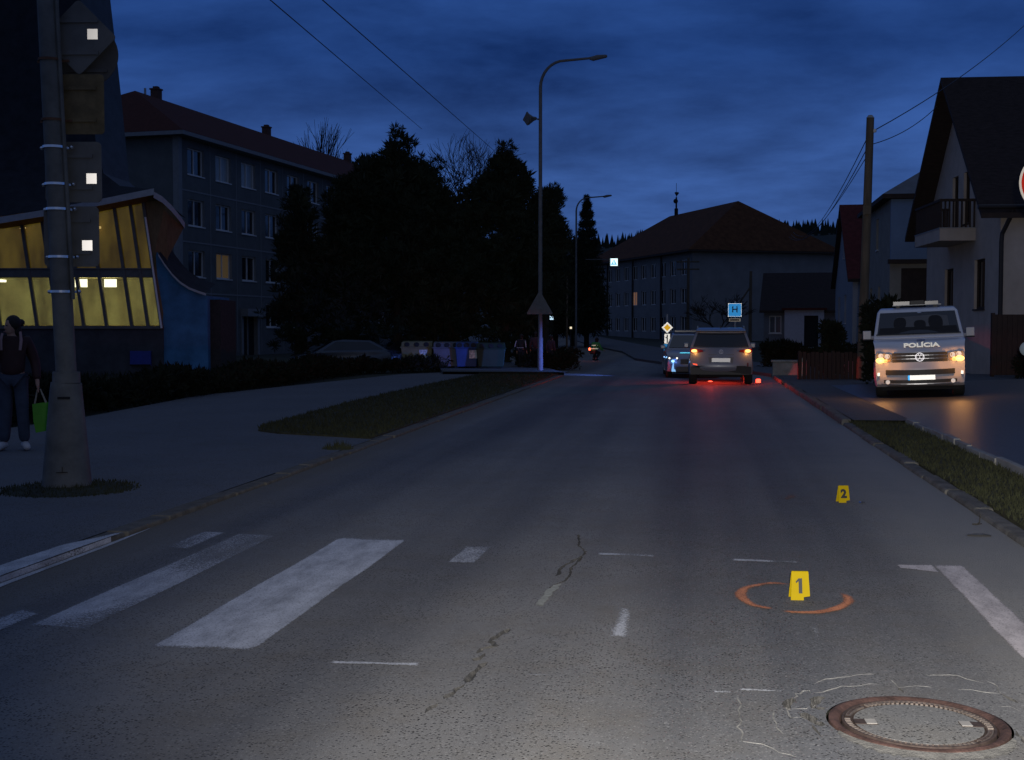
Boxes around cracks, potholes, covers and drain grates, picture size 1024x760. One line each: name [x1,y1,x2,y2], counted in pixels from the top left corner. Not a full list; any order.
manhole cover [828,696,1017,760]
crack [425,535,587,713]
